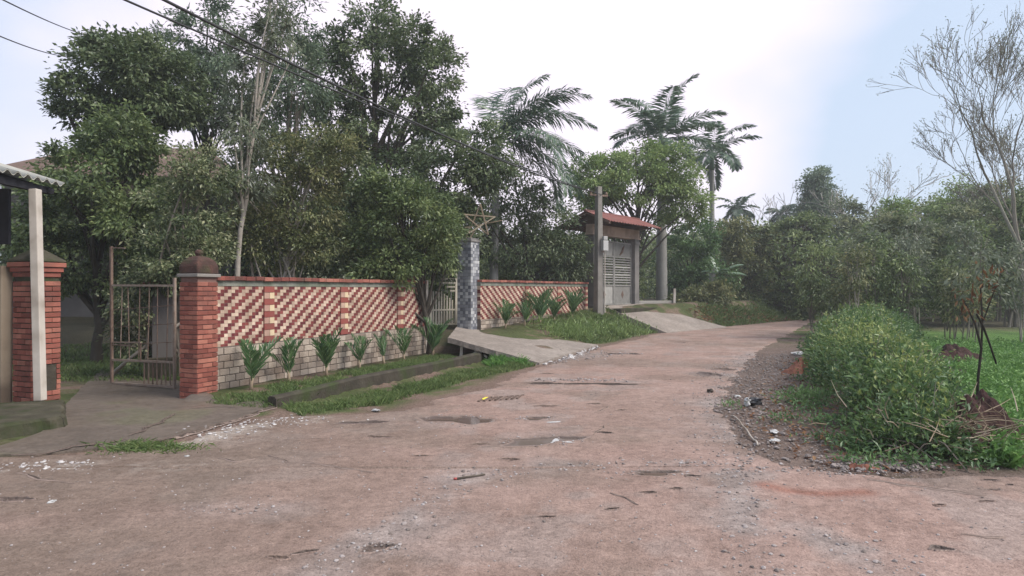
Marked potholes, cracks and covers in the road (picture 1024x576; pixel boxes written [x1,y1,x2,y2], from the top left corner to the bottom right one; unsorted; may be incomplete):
pothole [417,415,495,425]
pothole [360,543,397,554]
pothole [501,435,590,447]
